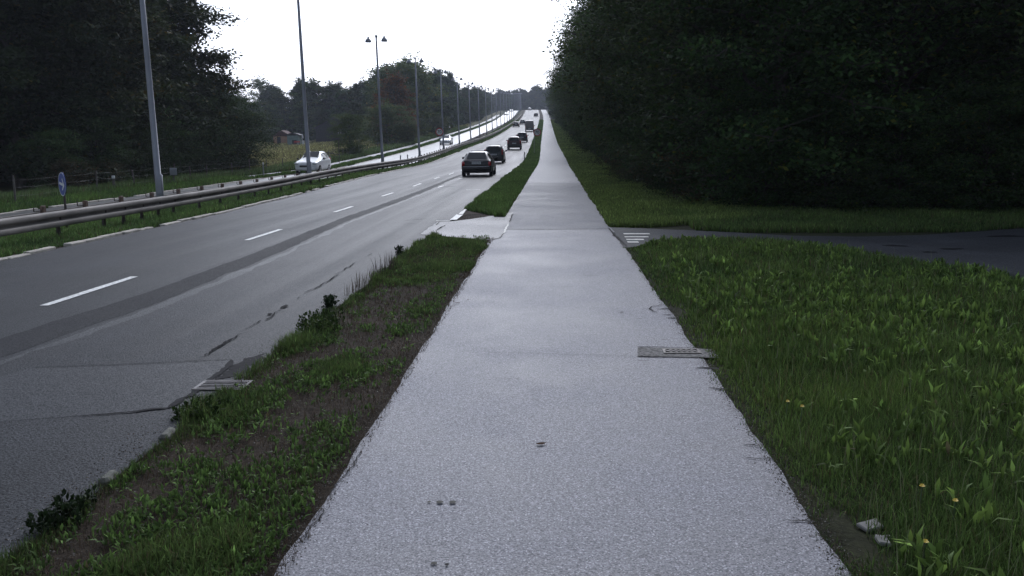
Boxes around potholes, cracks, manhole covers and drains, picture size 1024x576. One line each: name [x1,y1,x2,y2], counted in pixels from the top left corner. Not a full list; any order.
drain grate [191,380,253,390]
crack [204,310,280,356]
